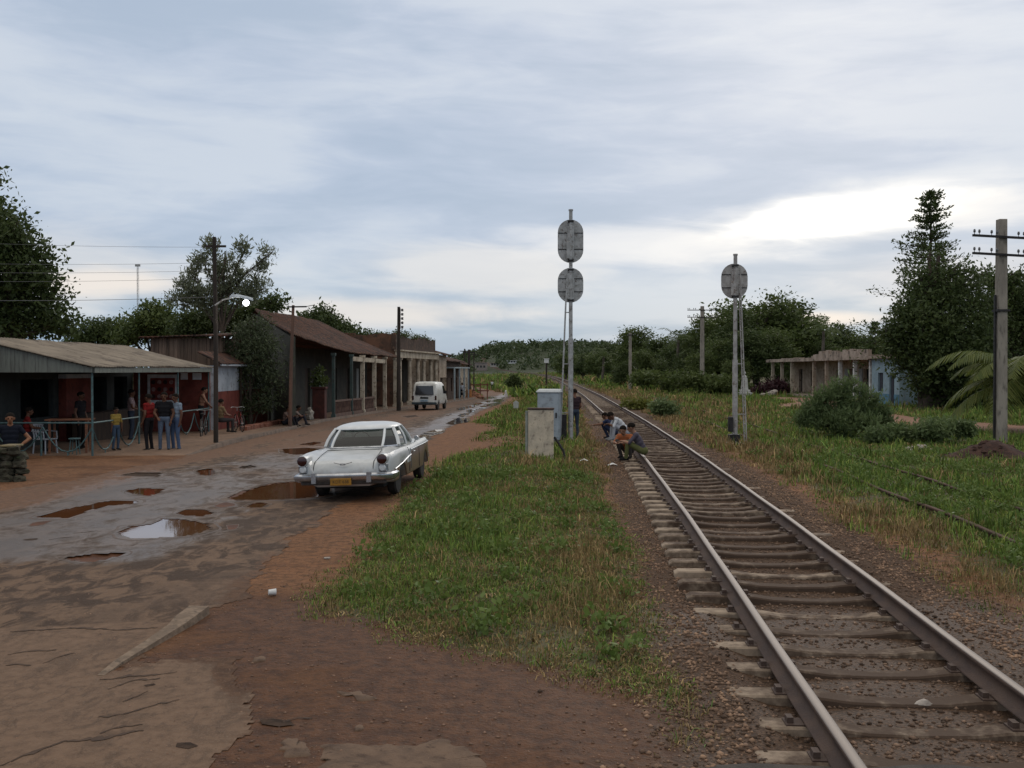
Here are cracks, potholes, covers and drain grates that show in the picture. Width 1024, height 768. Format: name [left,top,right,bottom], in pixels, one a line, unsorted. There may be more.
pothole [193,468,219,476]
crack [2,672,180,765]
pothole [171,508,218,517]
pothole [56,551,132,563]
pothole [108,516,222,541]
pothole [29,499,146,520]
pothole [121,487,172,496]
pothole [215,480,337,502]
crack [5,649,72,666]
